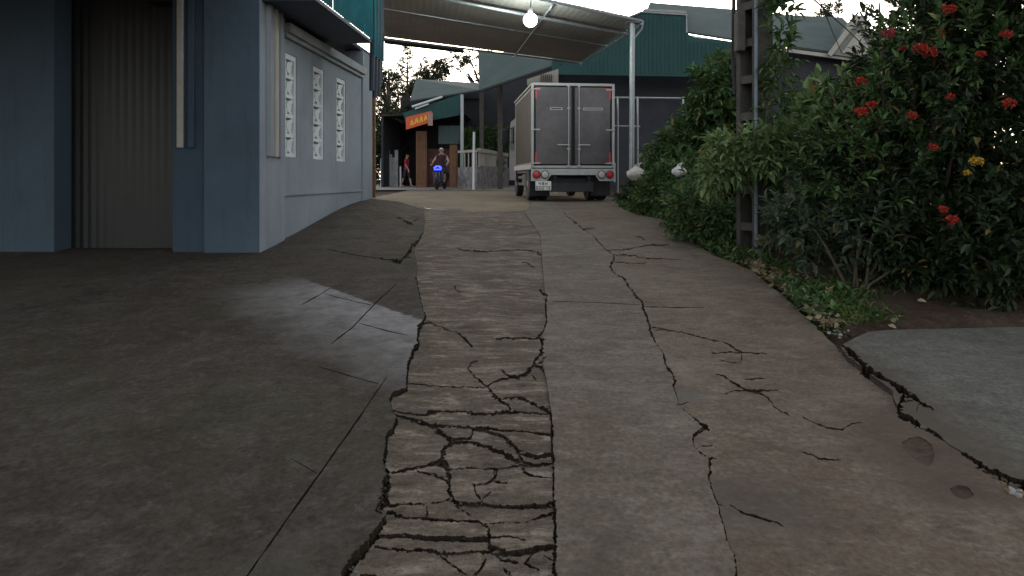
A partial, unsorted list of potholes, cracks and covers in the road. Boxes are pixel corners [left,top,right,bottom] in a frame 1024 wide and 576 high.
pothole [950,485,974,500]
crack [329,217,735,576]
crack [564,213,944,576]
pothole [901,436,934,466]
